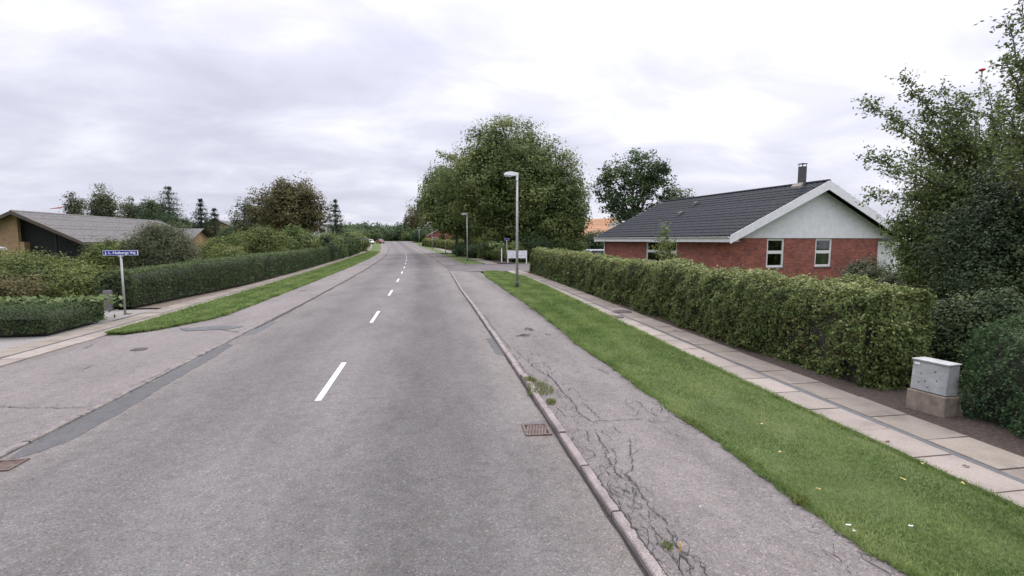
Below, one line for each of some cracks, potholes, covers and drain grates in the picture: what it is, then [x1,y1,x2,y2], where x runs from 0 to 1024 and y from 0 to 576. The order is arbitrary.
crack [592,465,718,576]
crack [532,363,690,454]
drain grate [521,423,552,436]
